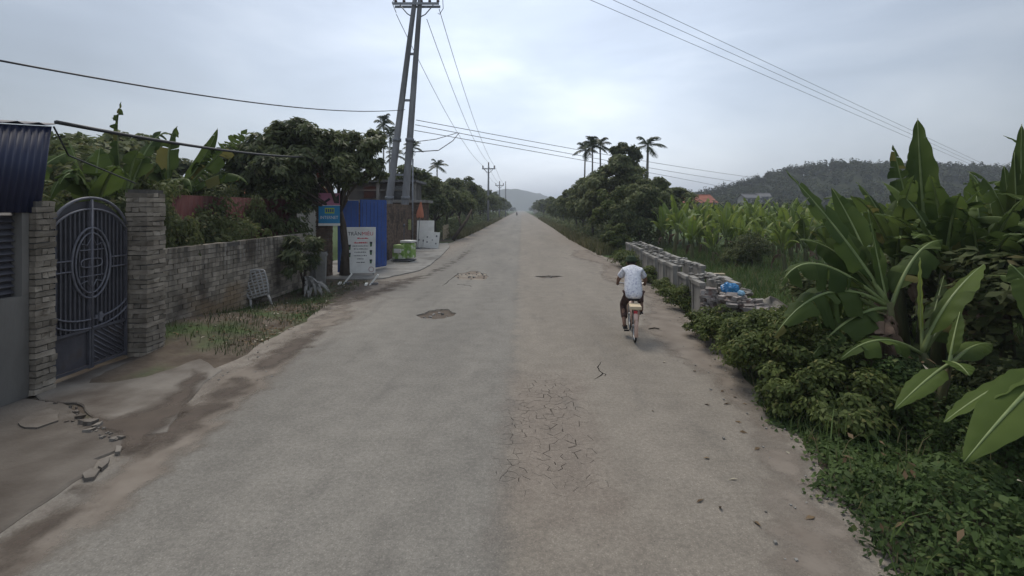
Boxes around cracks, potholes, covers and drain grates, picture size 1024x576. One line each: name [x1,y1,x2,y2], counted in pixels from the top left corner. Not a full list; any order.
crack [481,362,630,504]
pothole [455,271,489,280]
pothole [416,309,456,319]
